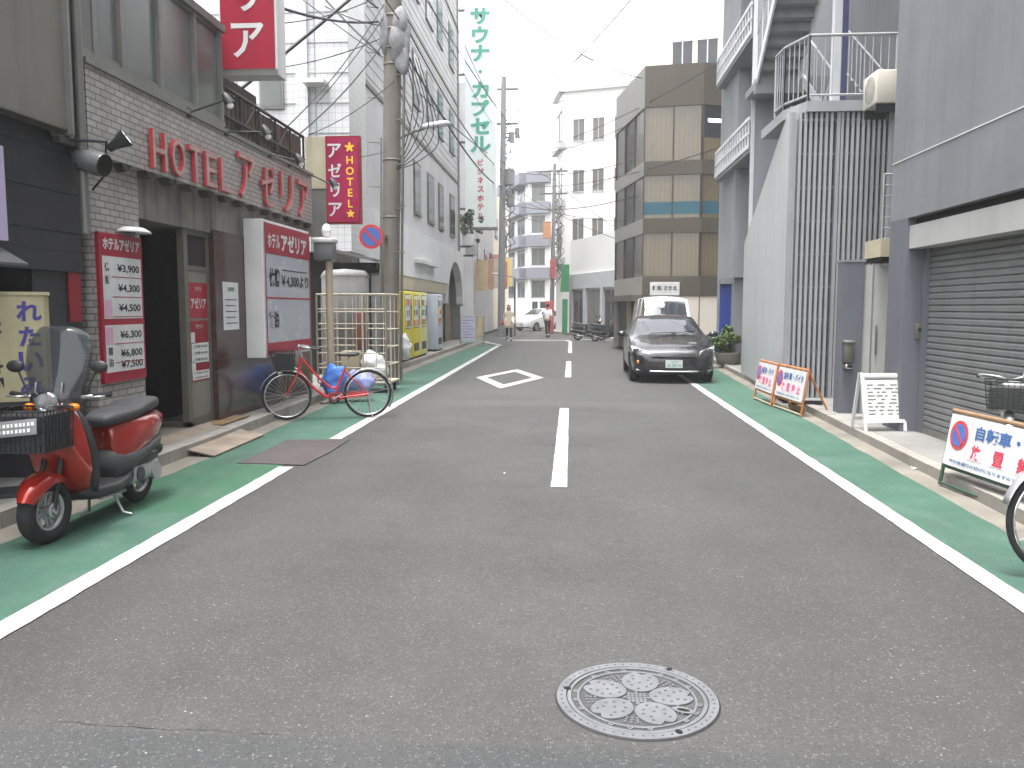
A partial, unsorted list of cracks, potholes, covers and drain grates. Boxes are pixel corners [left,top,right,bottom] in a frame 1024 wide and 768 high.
crack [60,721,278,735]
manhole cover [555,663,721,742]
